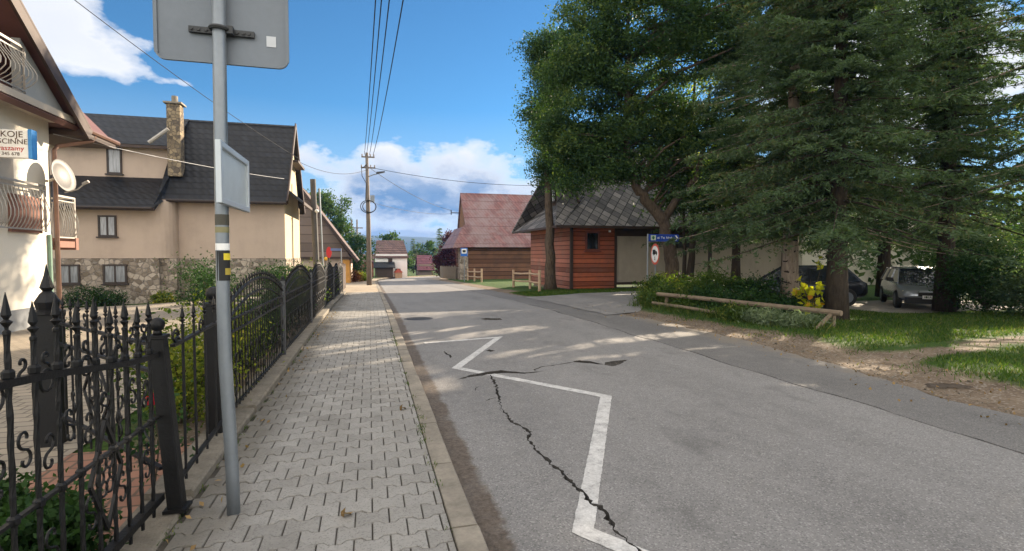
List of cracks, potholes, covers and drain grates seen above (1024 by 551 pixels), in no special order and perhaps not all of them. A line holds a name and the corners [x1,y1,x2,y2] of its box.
crack [444,352,641,551]
